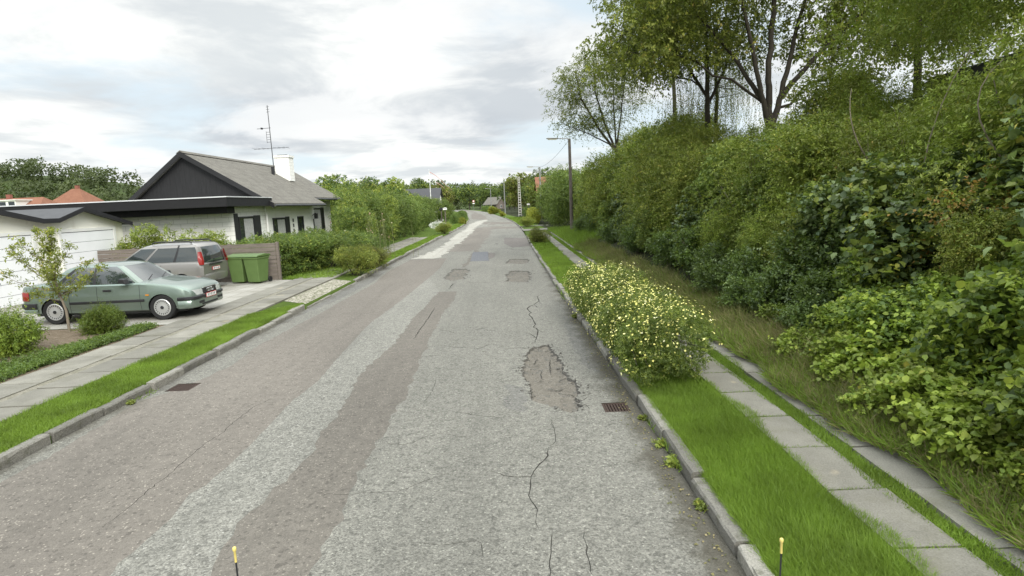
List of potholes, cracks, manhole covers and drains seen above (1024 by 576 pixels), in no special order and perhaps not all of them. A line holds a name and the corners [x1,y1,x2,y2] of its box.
drain grate [165,383,201,392]
crack [492,420,570,575]
pothole [516,344,589,413]
drain grate [602,402,630,412]
crack [509,291,592,408]
